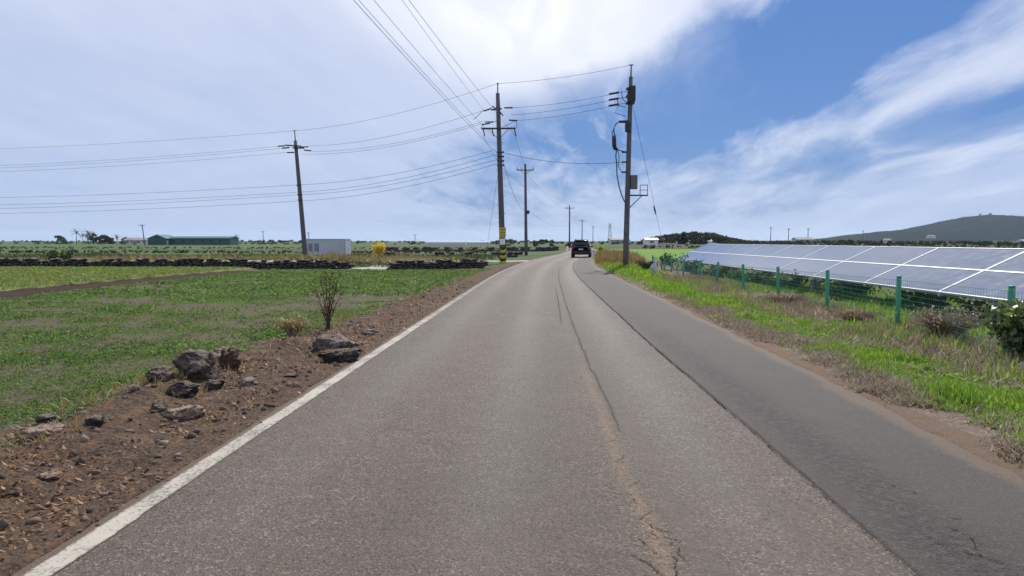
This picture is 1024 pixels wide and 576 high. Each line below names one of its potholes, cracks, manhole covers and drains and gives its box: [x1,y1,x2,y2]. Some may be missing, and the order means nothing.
crack [893,486,1002,565]
